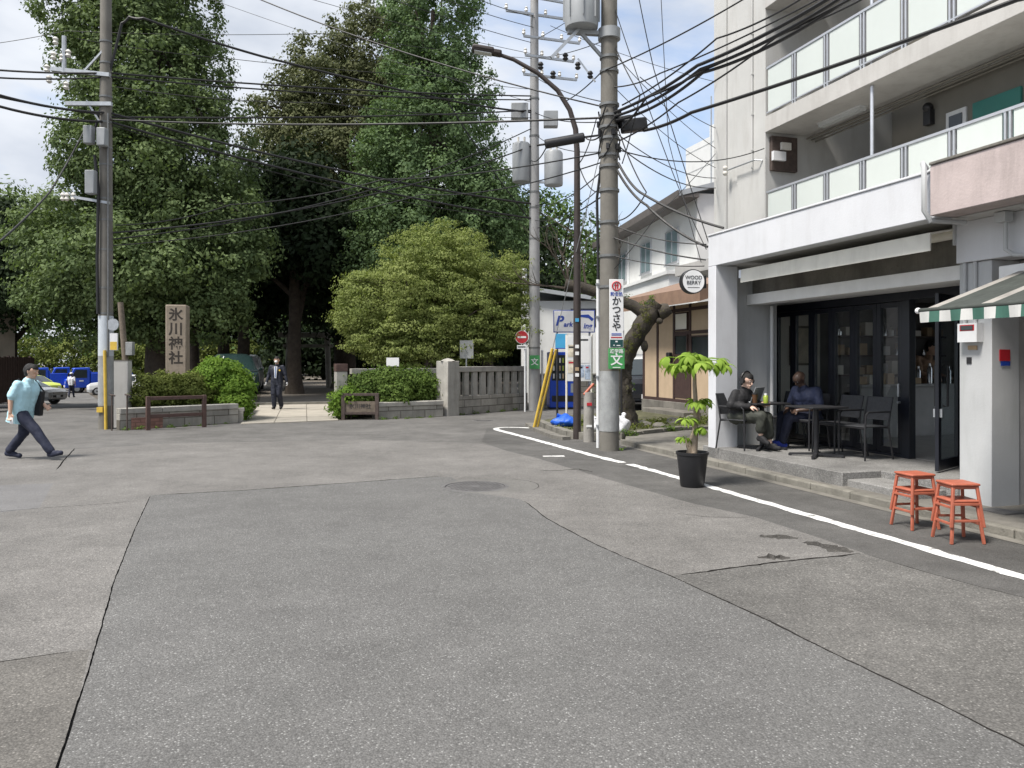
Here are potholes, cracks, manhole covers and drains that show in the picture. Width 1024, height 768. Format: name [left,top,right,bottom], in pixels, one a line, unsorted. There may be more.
manhole cover [441,481,509,492]
pothole [803,541,854,553]
